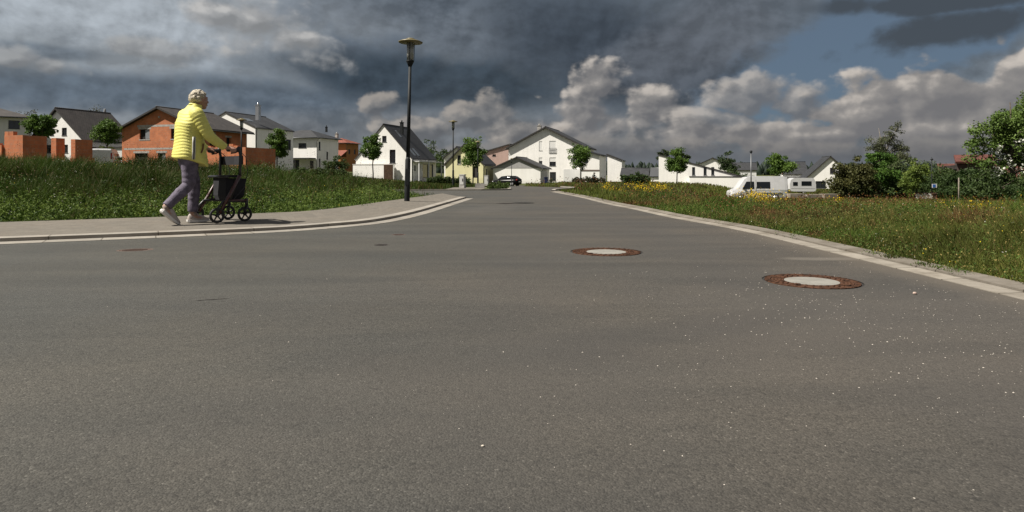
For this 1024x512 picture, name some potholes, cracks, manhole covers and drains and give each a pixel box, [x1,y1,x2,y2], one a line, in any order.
manhole cover [571,247,642,256]
manhole cover [762,274,864,289]
